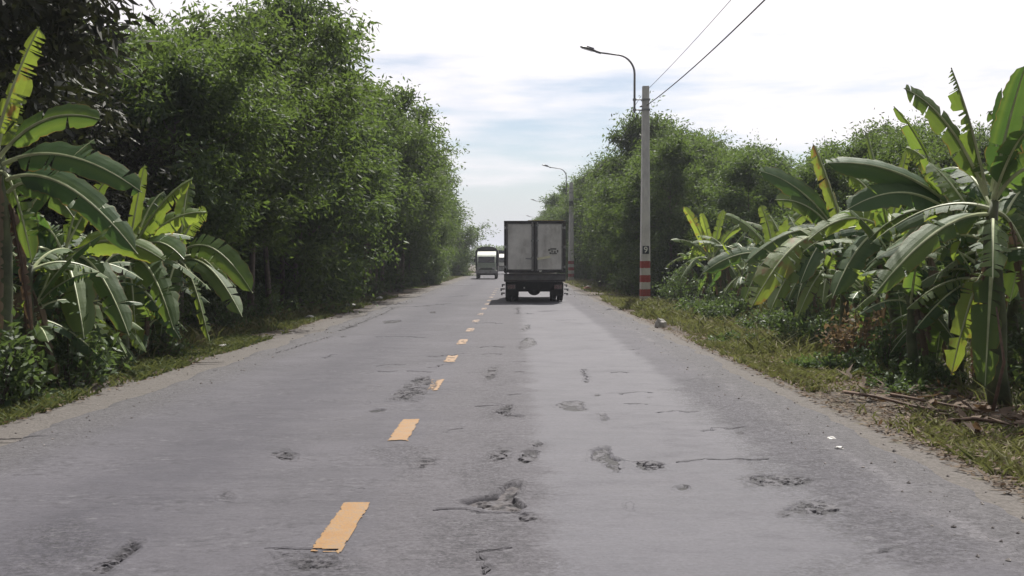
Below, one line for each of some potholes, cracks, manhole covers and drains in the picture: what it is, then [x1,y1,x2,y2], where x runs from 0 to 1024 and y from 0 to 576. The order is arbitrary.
crack [579,369,590,382]
pothole [516,337,540,351]
pothole [452,478,530,515]
pothole [585,445,637,475]
crack [620,392,743,432]
pothole [553,400,591,412]
